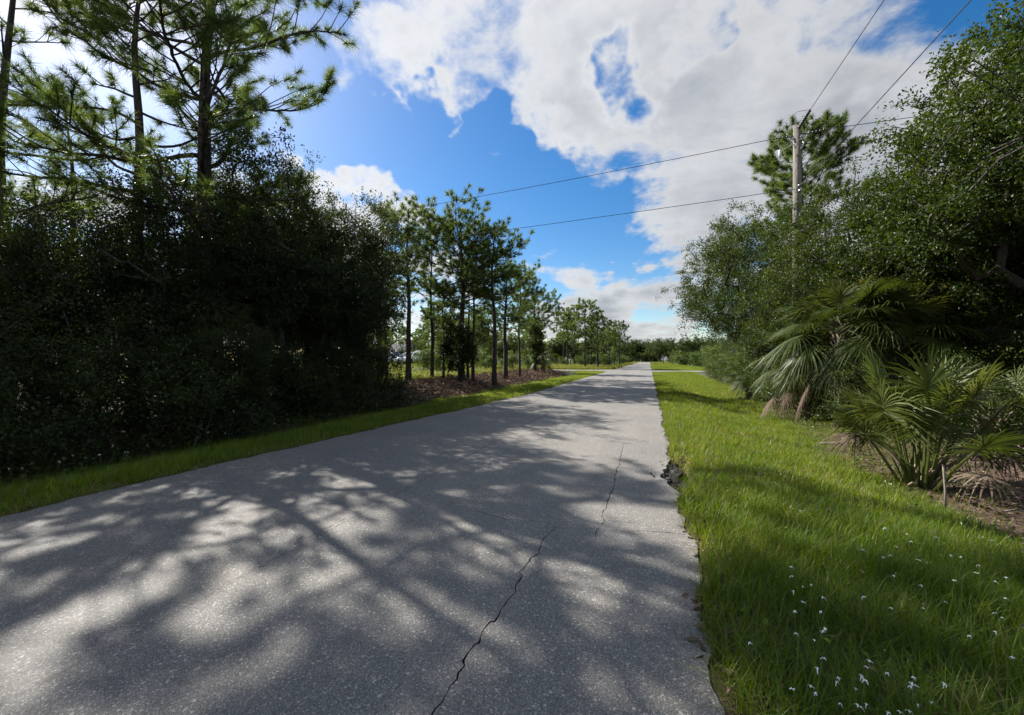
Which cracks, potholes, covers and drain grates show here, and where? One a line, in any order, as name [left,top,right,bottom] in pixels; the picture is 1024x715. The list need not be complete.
pothole [650,461,688,491]
crack [595,444,624,537]
crack [431,511,555,715]
